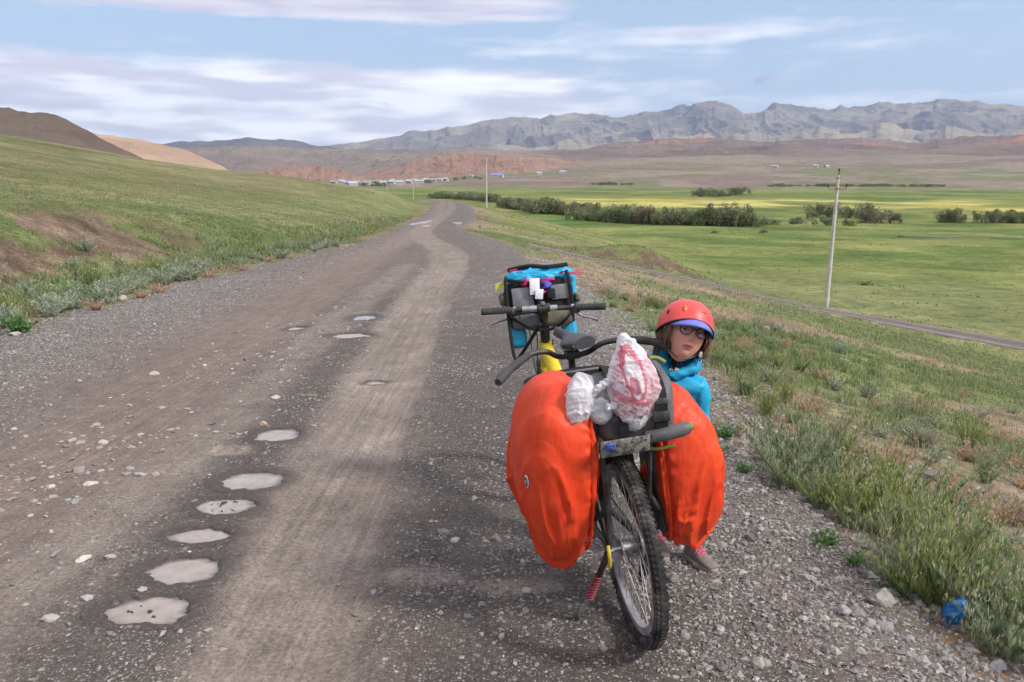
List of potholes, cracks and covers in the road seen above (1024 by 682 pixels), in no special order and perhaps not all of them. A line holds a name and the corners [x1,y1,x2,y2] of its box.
pothole [181,494,270,520]
pothole [242,425,309,444]
pothole [321,332,382,340]
pothole [120,552,240,590]
pothole [149,524,248,548]
pothole [77,588,214,630]
pothole [203,467,301,494]
